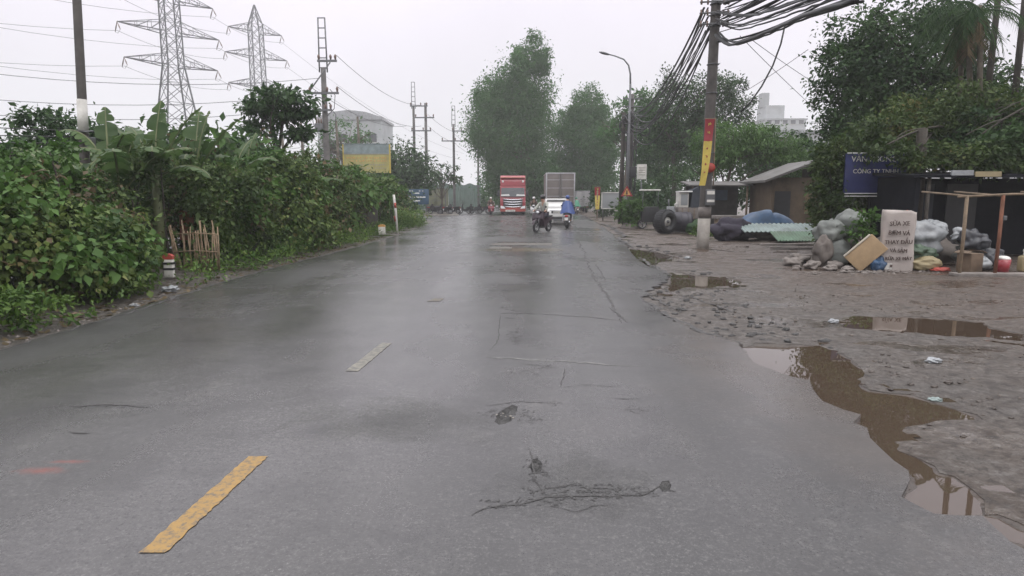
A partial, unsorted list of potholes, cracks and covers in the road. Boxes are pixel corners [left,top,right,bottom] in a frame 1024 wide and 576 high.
crack [471,447,674,515]
pothole [745,343,982,421]
pothole [903,455,985,515]
crack [477,364,572,423]
crack [564,222,741,344]
pothole [495,405,517,425]
